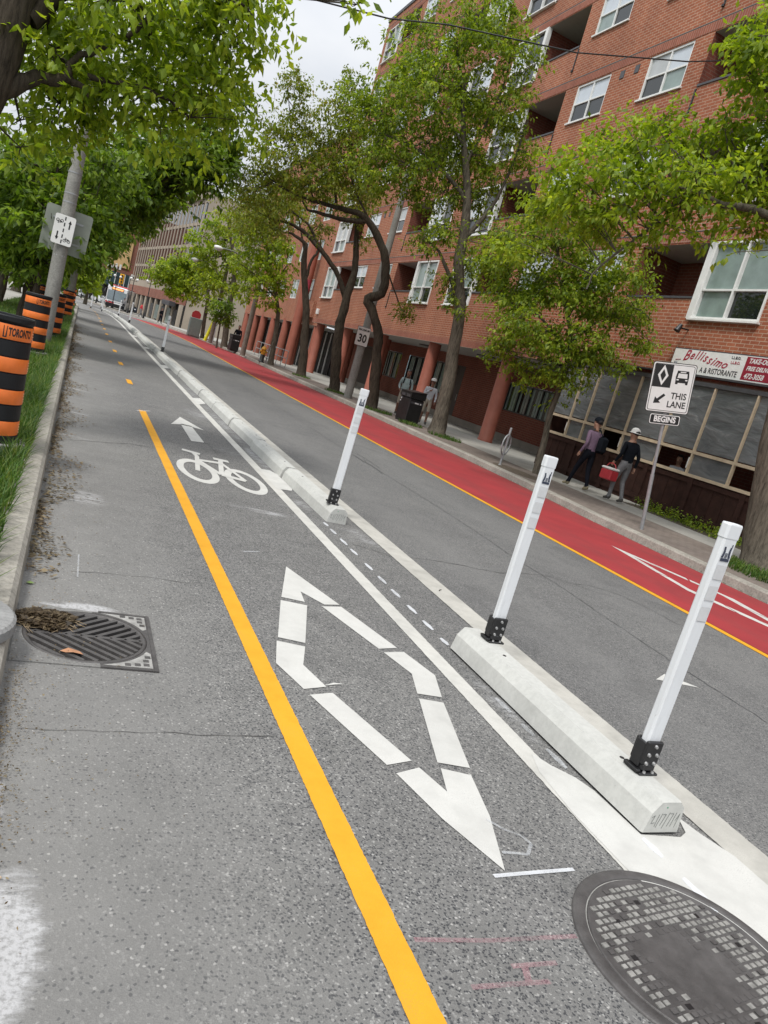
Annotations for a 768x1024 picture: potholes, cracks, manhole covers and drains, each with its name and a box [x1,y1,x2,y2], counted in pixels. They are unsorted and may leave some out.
manhole cover [571,870,768,1024]
drain grate [8,602,159,673]
crack [21,727,256,736]
